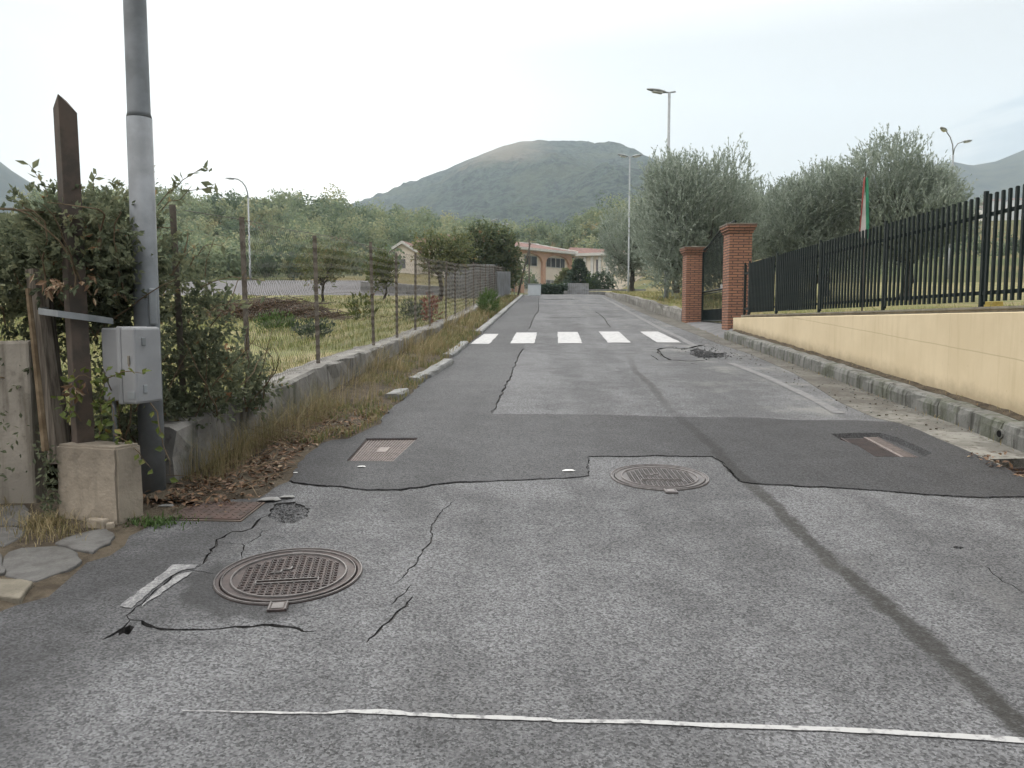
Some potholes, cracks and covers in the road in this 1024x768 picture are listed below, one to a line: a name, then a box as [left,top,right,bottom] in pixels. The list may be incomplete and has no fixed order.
manhole cover [610,464,709,494]
manhole cover [165,501,265,522]
pothole [268,502,309,524]
drain grate [832,433,931,457]
crack [369,504,451,640]
manhole cover [348,438,417,461]
crack [102,571,311,640]
crack [198,521,273,567]
manhole cover [213,547,363,613]
